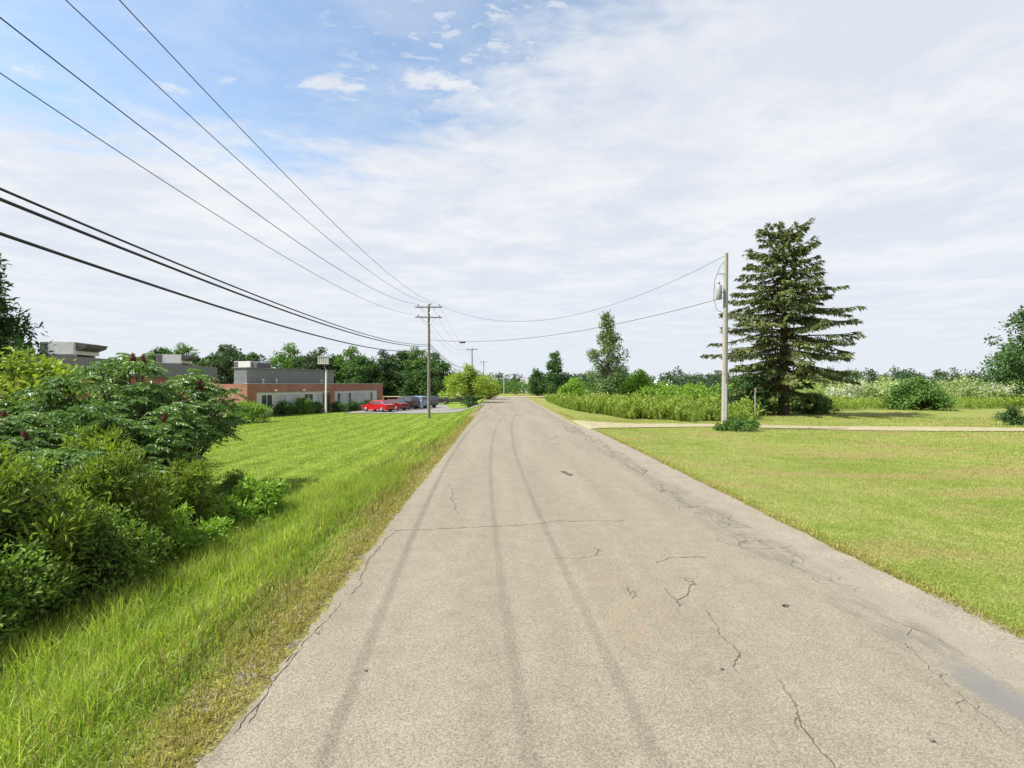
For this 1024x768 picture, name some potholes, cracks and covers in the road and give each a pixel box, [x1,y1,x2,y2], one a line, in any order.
crack [875,615,1013,740]
crack [664,578,741,670]
crack [550,421,862,595]
crack [780,681,836,768]
